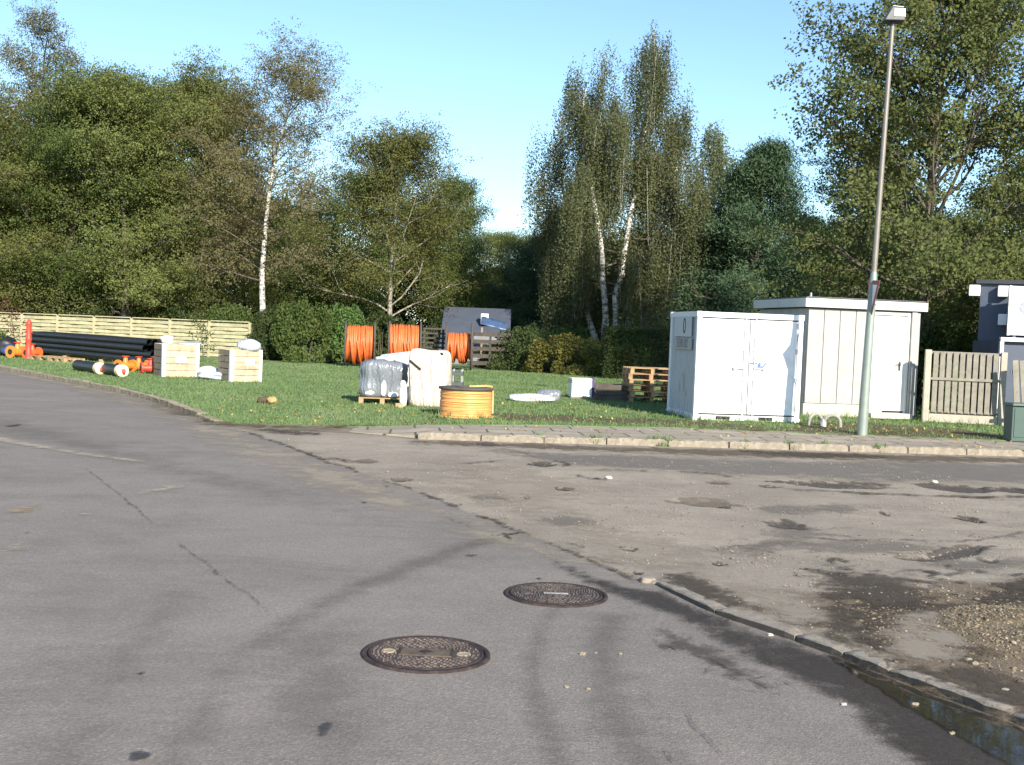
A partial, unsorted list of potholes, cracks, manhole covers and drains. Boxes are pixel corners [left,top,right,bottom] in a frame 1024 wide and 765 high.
pothole [918,544,997,561]
pothole [953,515,987,523]
manhole cover [504,582,608,608]
manhole cover [361,635,490,674]
pothole [767,518,808,530]
pothole [765,480,891,490]
